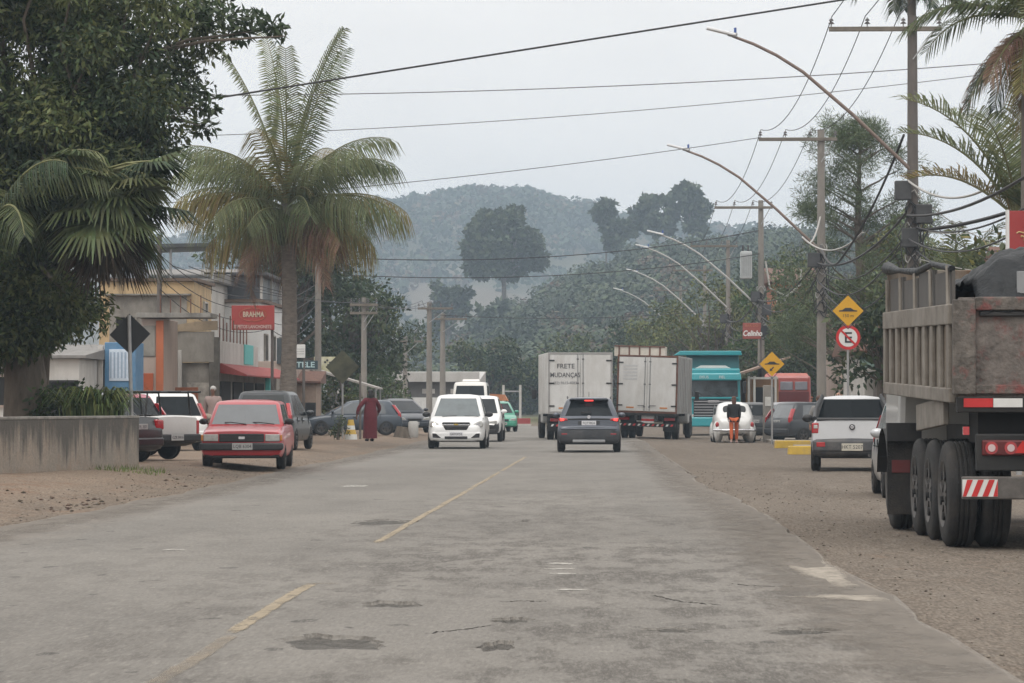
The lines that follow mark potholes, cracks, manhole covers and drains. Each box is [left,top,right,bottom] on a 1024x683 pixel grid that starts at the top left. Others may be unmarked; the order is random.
pothole [475,640,515,652]
crack [654,595,718,605]
pothole [274,633,386,650]
